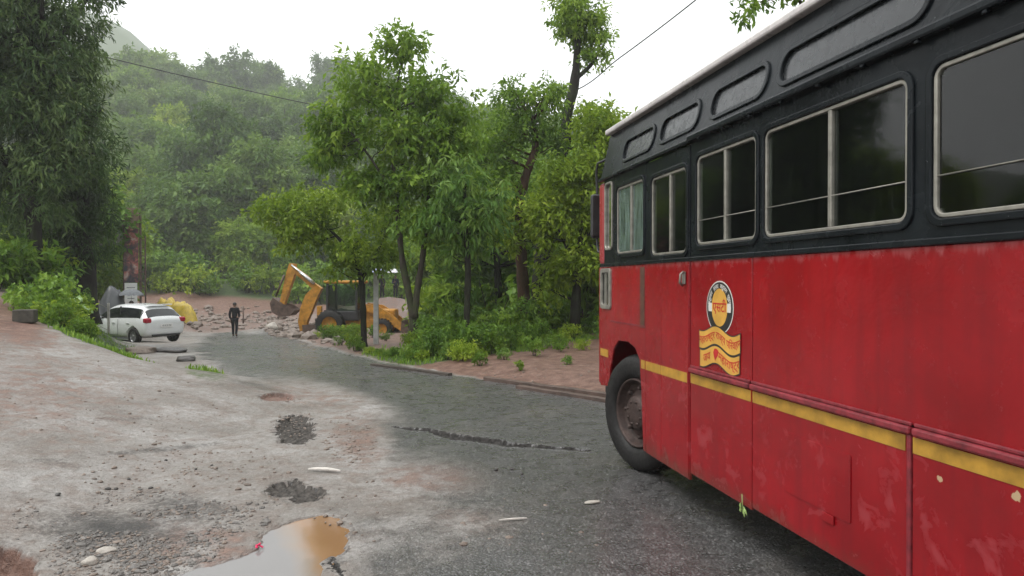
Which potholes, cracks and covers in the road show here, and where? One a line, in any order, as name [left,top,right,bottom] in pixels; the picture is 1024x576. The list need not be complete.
pothole [261,478,330,504]
crack [388,426,596,453]
pothole [258,392,296,402]
pothole [271,414,325,446]
pothole [177,514,355,576]
